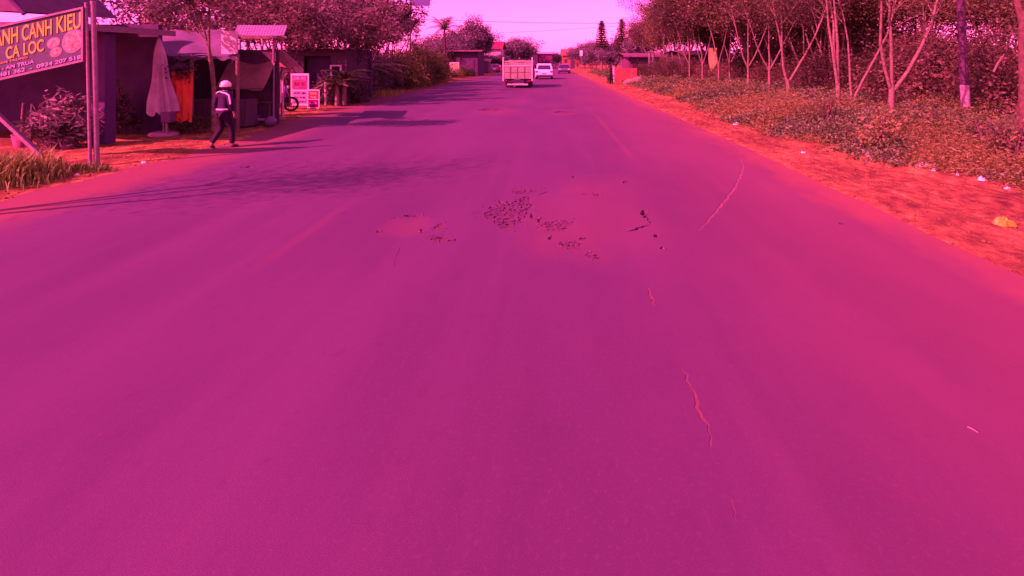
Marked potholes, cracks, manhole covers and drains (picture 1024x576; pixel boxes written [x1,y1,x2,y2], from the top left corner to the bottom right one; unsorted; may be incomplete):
crack [647,285,655,307]
crack [699,155,745,230]
crack [682,367,712,448]
